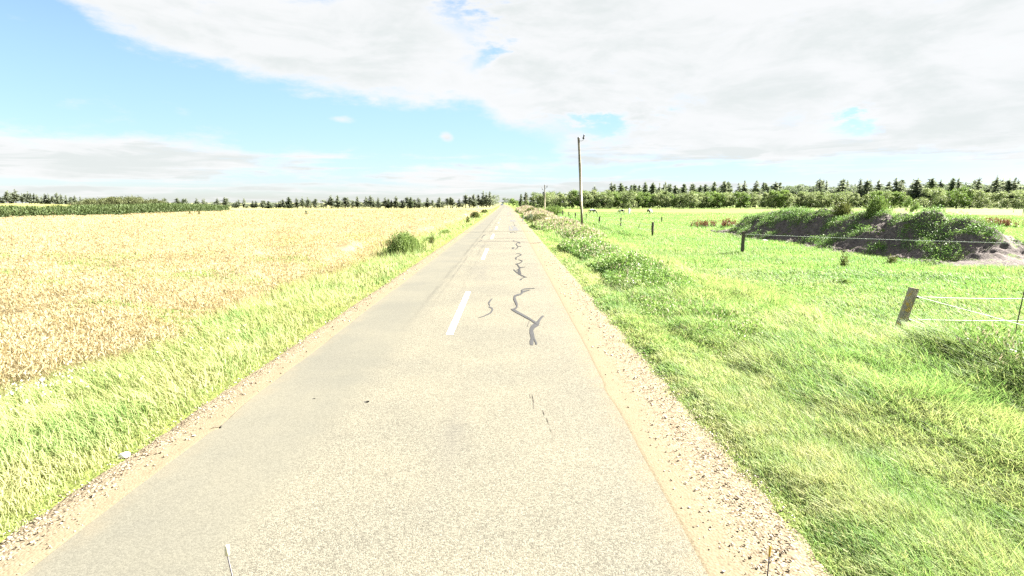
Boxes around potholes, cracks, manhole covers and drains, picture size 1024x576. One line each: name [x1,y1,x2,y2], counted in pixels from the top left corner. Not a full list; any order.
crack [511,288,543,345]
